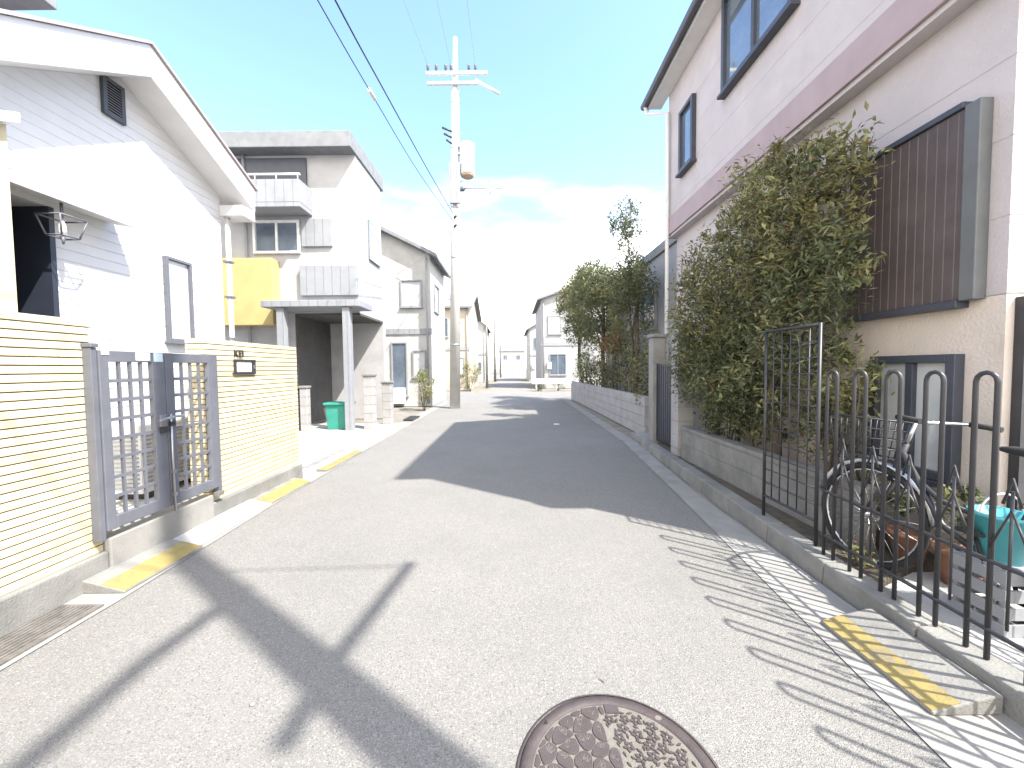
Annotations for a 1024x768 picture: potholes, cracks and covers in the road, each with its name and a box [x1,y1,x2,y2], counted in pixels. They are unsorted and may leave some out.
manhole cover [516,694,719,768]
drain grate [0,604,105,671]
